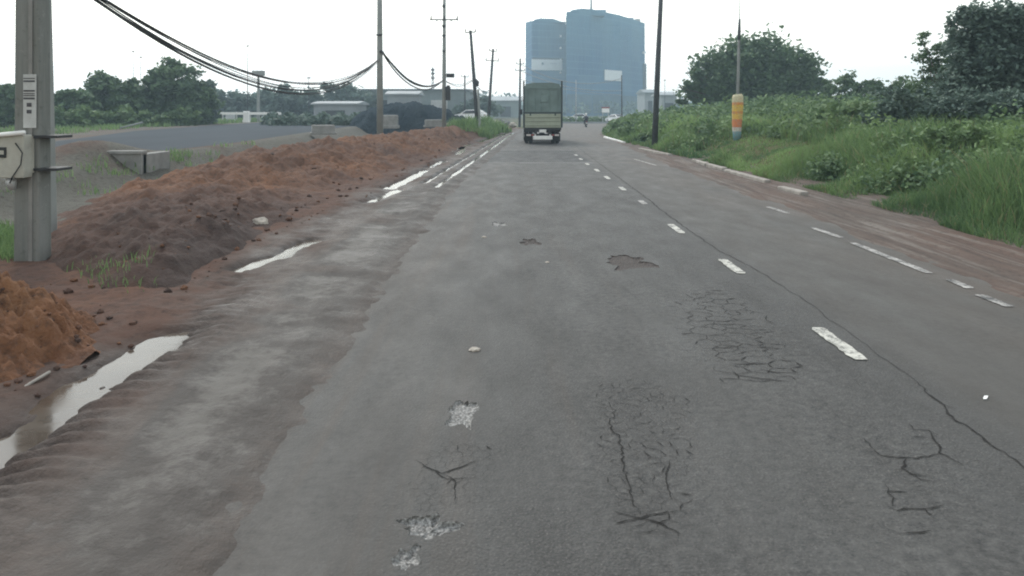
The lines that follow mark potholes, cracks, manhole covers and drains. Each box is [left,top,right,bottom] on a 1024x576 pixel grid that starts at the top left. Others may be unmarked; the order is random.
pothole [396,514,465,540]
crack [411,441,493,515]
pothole [444,400,479,430]
crack [864,383,1024,534]
pothole [390,543,422,571]
crack [596,379,692,538]
crack [576,146,915,380]
pothole [606,255,659,271]
